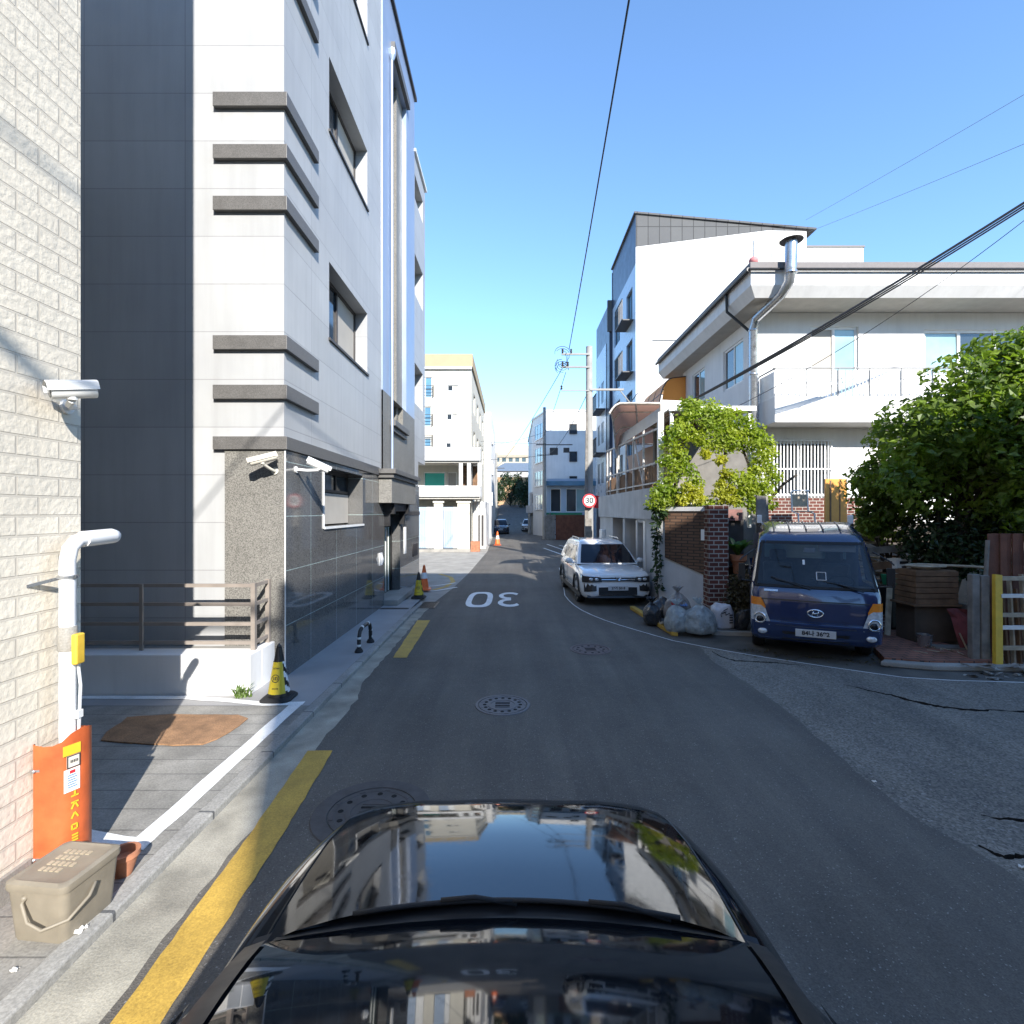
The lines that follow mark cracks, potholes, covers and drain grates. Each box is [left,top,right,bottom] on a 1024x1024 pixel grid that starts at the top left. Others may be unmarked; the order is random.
crack [978,845,1024,860]
manhole cover [475,694,530,716]
manhole cover [570,644,611,655]
manhole cover [309,780,430,842]
crack [981,814,1024,822]
crack [847,685,1024,713]
